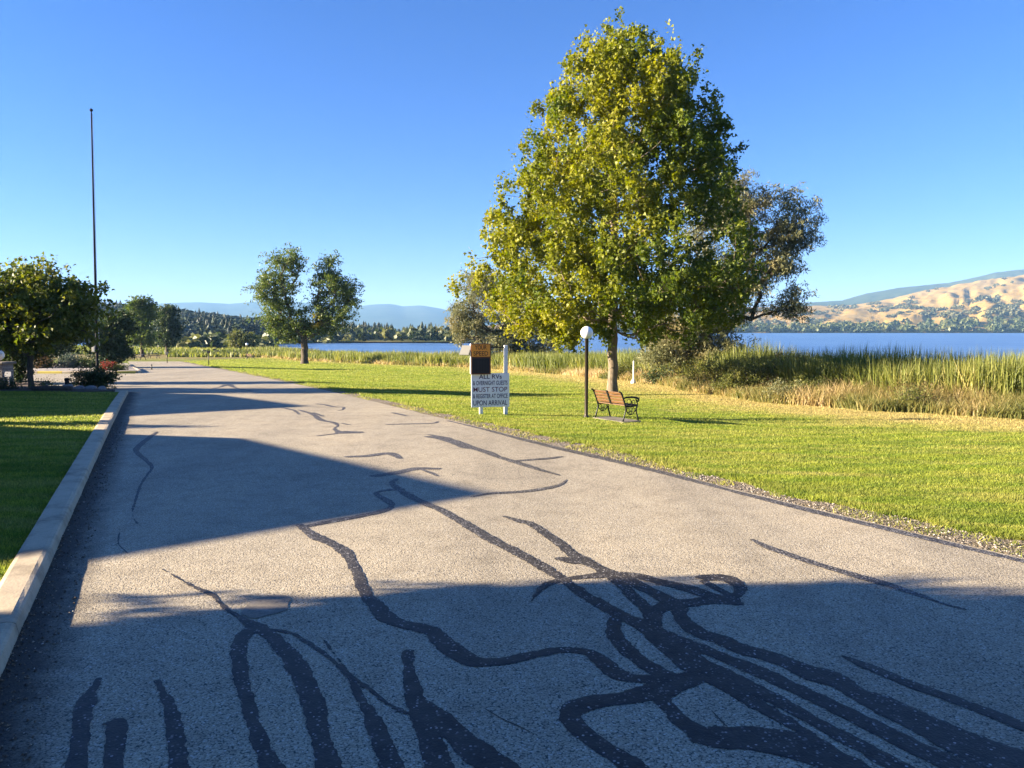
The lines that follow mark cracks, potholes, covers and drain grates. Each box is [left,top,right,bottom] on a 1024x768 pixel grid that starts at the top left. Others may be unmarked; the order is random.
crack [296,478,1024,768]
